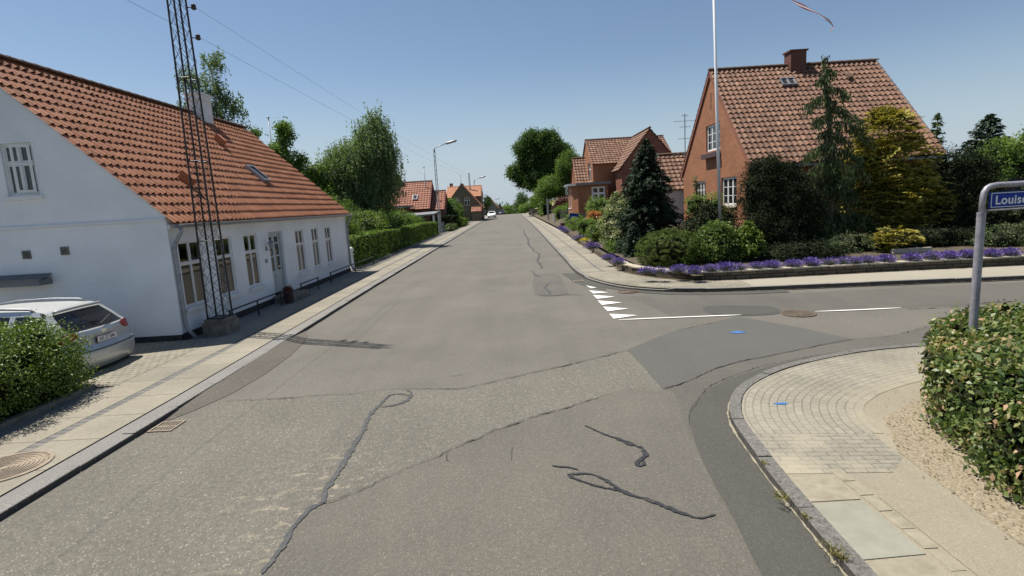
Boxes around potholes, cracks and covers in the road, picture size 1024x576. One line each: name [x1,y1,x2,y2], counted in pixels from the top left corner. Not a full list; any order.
manhole cover [0,450,55,482]
drain grate [147,420,186,433]
crack [322,394,604,503]
